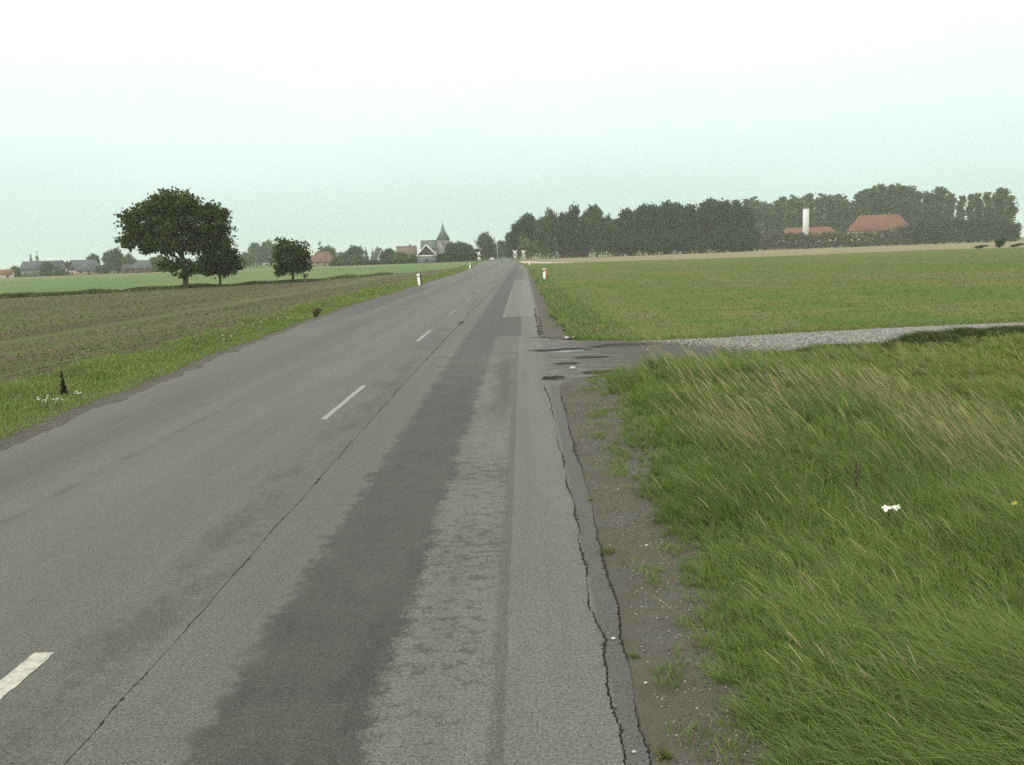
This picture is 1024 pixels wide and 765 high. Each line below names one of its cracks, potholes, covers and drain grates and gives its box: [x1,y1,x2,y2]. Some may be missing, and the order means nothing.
crack [534,308,544,336]
crack [544,387,653,765]
